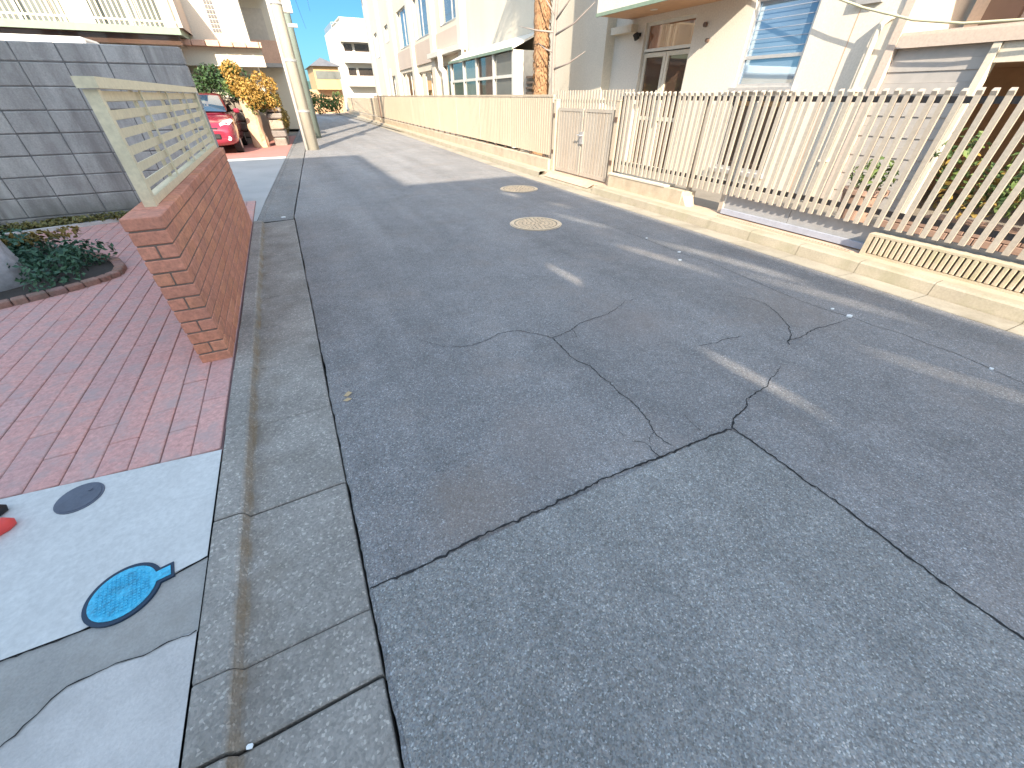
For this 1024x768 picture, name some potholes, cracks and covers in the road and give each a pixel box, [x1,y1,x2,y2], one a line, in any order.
manhole cover [500,185,538,193]
utility cover [81,561,178,628]
manhole cover [510,217,562,231]
crack [370,299,1024,640]
